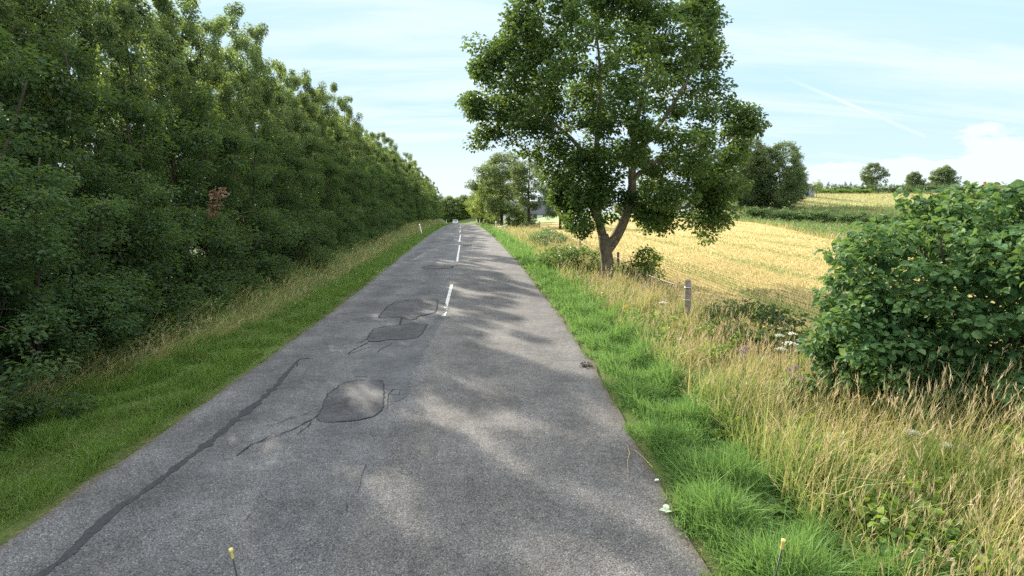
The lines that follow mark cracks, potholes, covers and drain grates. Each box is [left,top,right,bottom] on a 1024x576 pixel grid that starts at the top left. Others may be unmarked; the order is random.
crack [236,408,321,456]
